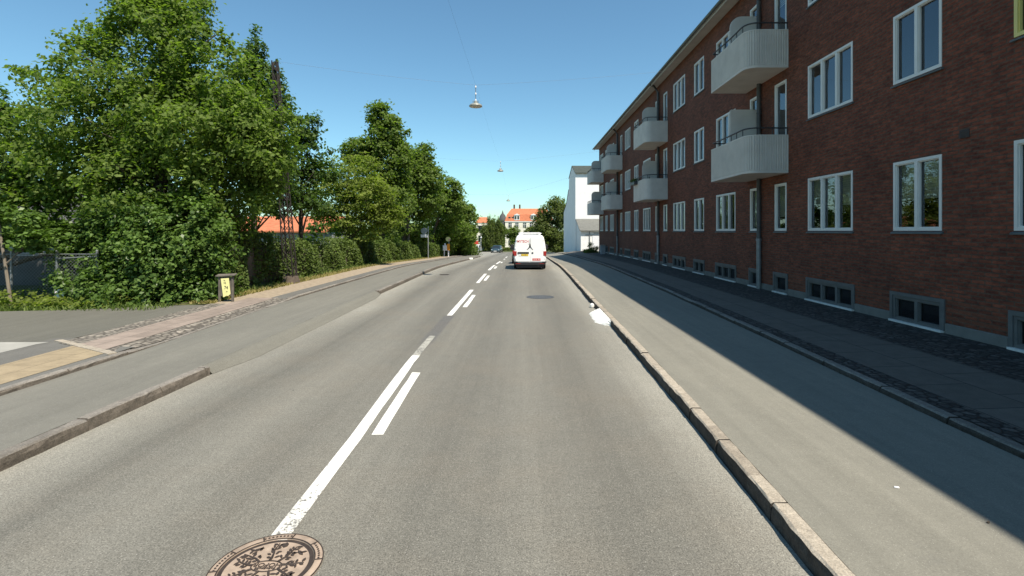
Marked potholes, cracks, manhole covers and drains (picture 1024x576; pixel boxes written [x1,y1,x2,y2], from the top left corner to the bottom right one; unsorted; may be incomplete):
manhole cover [206,533,324,576]
